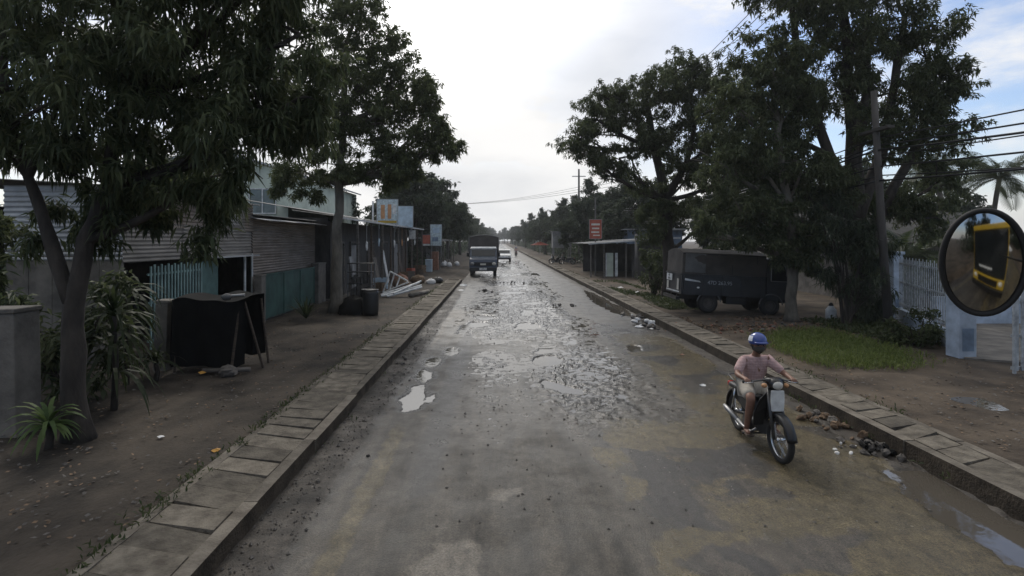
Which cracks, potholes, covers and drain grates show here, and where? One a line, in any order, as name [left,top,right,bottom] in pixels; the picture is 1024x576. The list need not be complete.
pothole [530,354,565,367]
pothole [626,344,645,352]
pothole [536,378,590,396]
pothole [442,347,461,356]
pothole [395,383,430,413]
pothole [412,368,436,383]
pothole [421,356,444,368]
pothole [513,322,543,330]
